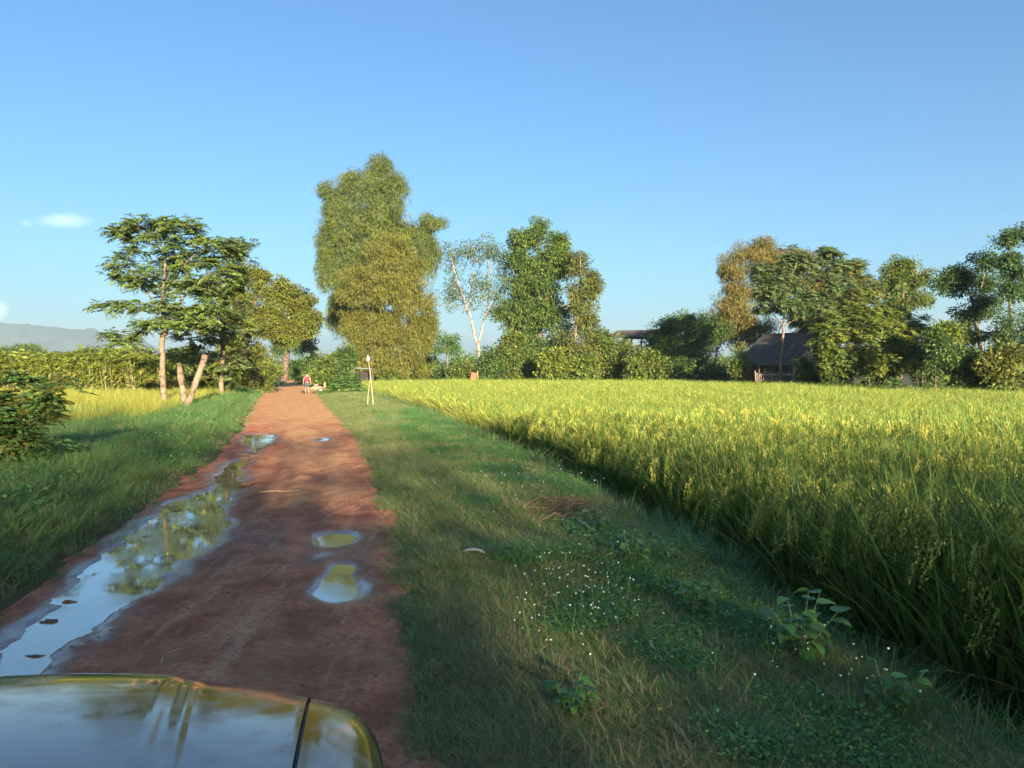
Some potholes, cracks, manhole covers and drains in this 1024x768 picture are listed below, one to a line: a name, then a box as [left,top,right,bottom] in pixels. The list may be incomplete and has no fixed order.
pothole [298,558,373,605]
pothole [0,433,284,676]
pothole [309,530,363,548]
